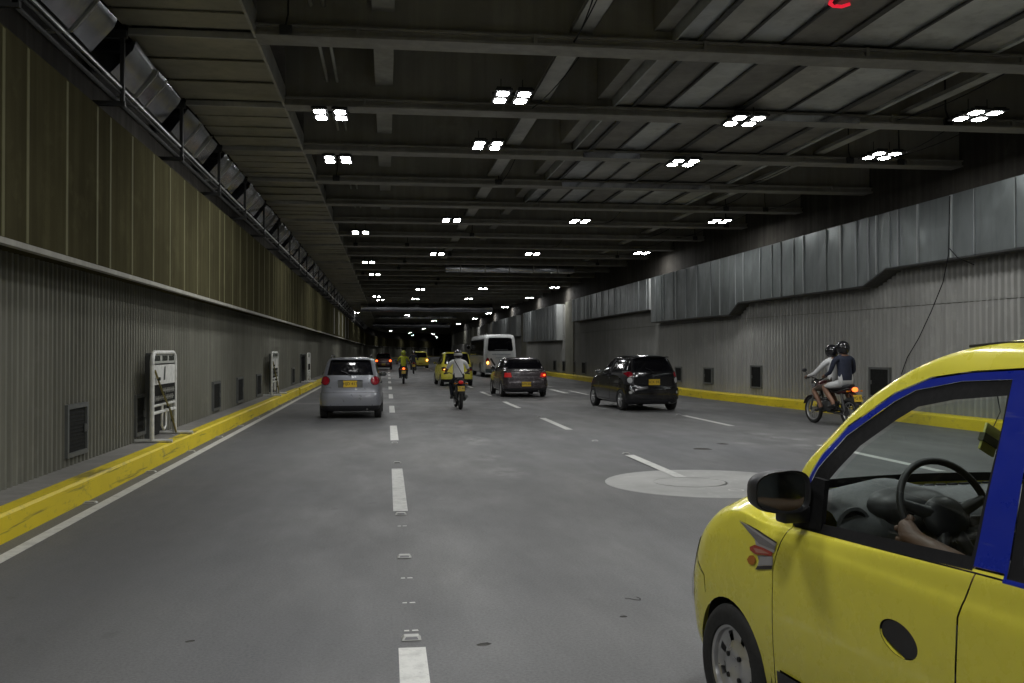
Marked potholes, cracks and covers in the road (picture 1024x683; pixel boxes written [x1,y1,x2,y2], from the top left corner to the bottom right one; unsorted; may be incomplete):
manhole cover [605,470,757,498]
